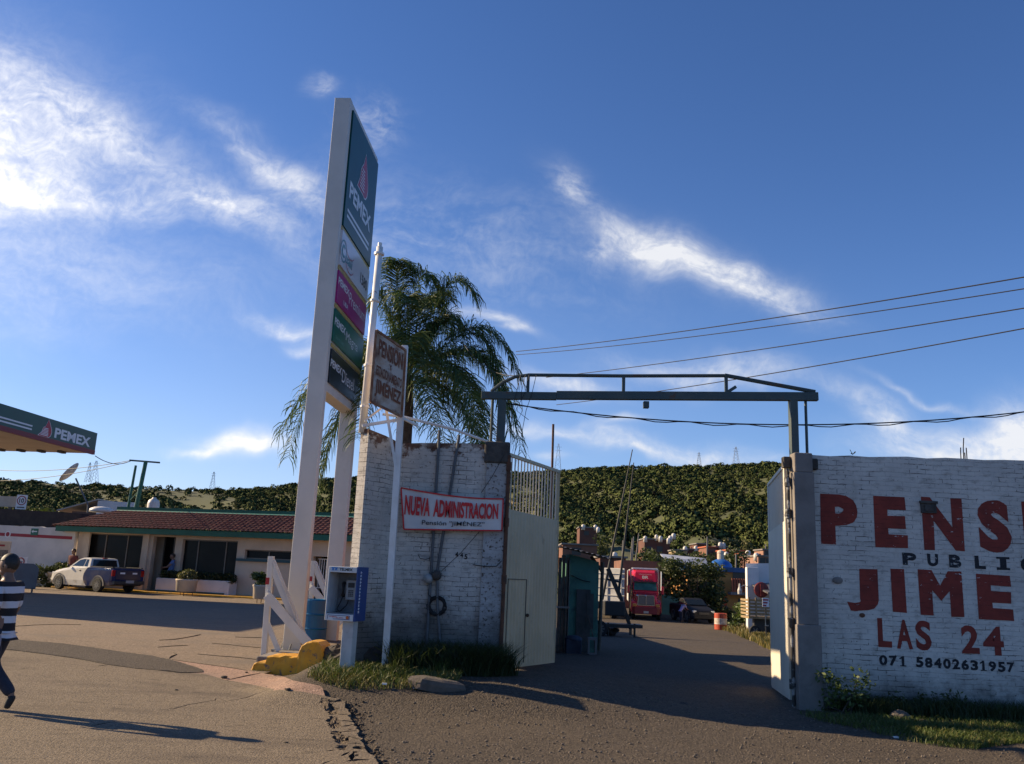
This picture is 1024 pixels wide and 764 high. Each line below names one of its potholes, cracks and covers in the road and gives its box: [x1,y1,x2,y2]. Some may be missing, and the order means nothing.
crack [162,634,262,658]
